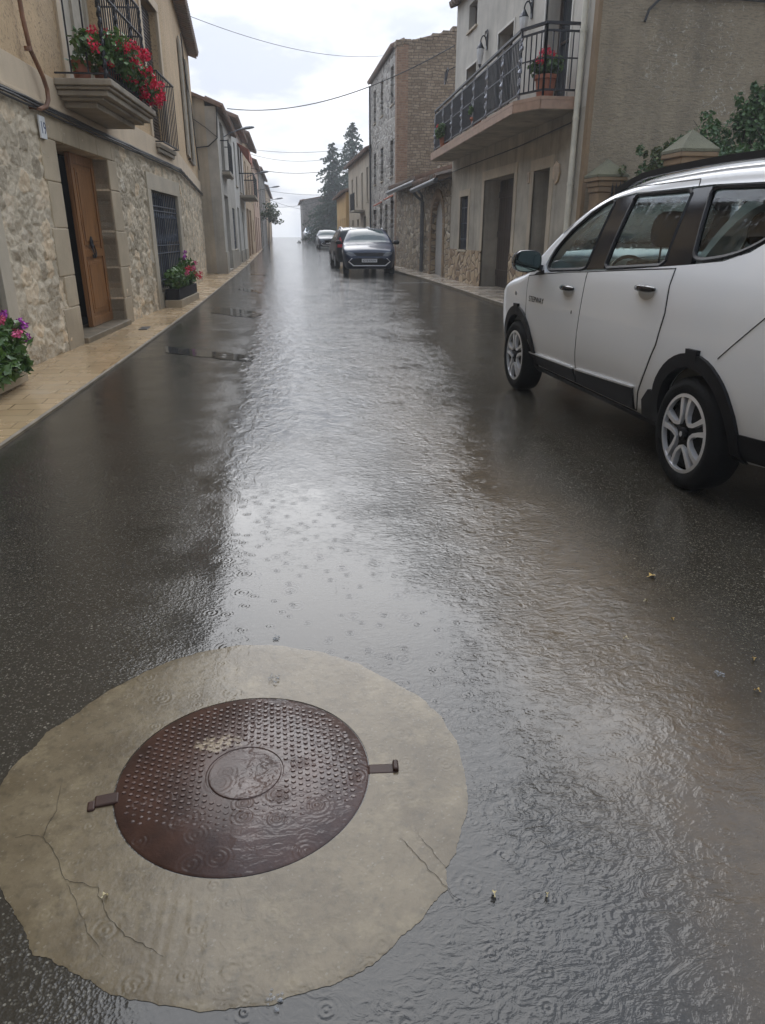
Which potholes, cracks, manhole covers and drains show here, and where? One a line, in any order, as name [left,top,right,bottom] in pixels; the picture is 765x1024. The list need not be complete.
manhole cover [87,699,399,878]
crack [15,788,161,956]
